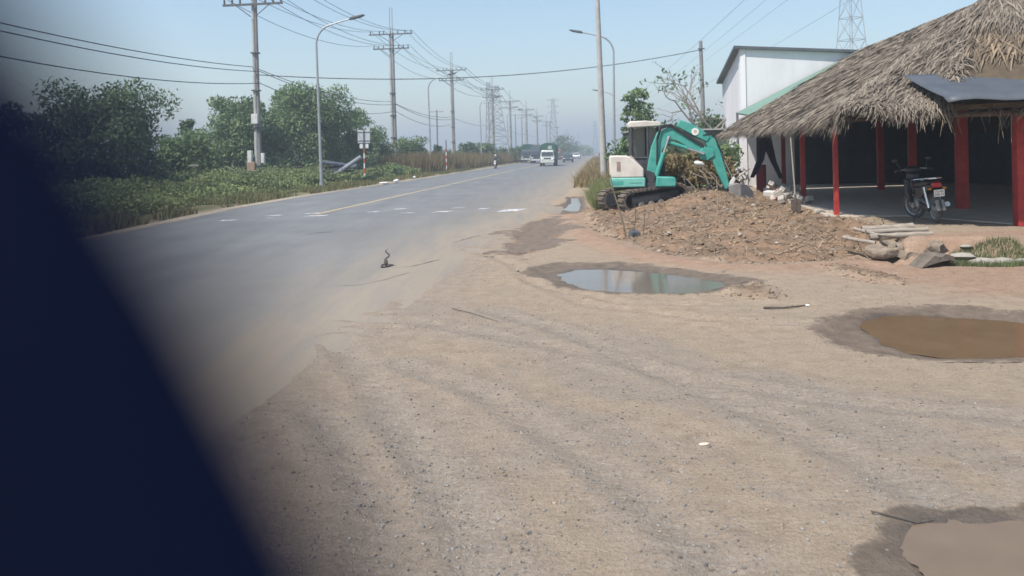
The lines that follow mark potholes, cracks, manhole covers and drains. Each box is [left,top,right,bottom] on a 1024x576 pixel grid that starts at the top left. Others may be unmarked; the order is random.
pothole [519,261,768,295]
pothole [845,500,1024,576]
pothole [803,304,1024,364]
pothole [544,196,590,214]
